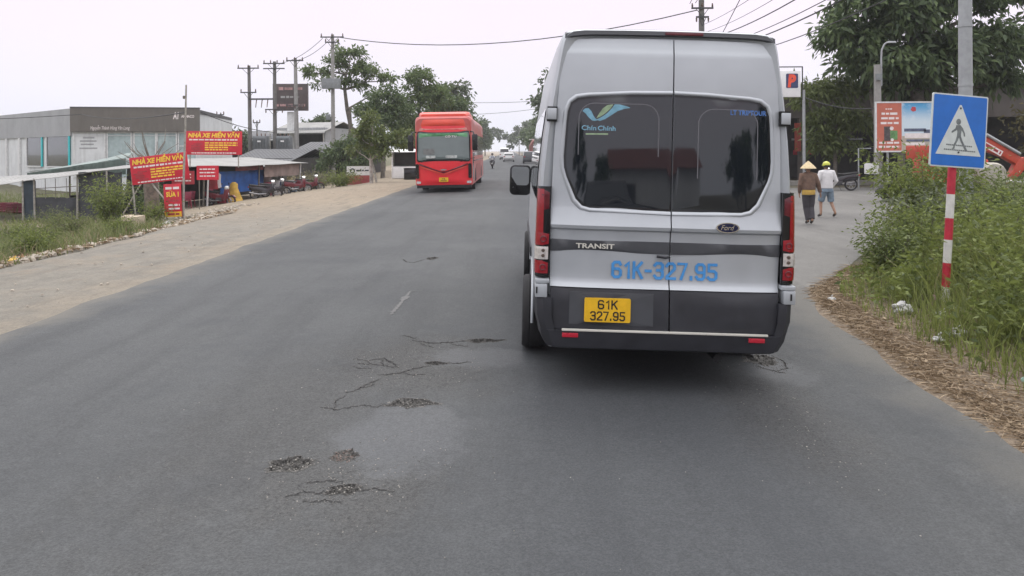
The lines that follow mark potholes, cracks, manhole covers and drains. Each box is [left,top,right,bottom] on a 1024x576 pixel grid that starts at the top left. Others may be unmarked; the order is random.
crack [320,334,469,411]
pothole [383,398,443,409]
pothole [264,455,319,473]
crack [285,476,398,505]
pothole [329,448,360,463]
pothole [742,354,779,367]
